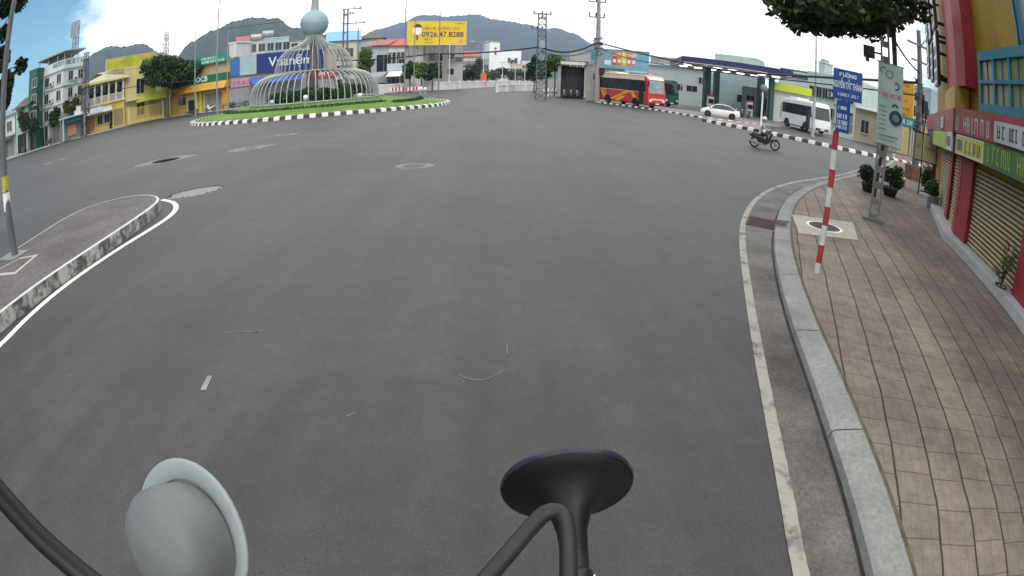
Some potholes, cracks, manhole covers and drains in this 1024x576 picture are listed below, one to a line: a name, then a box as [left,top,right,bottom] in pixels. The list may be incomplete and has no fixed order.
drain grate [745,215,791,231]
manhole cover [792,215,858,241]
pothole [166,185,223,199]
manhole cover [134,154,198,167]
